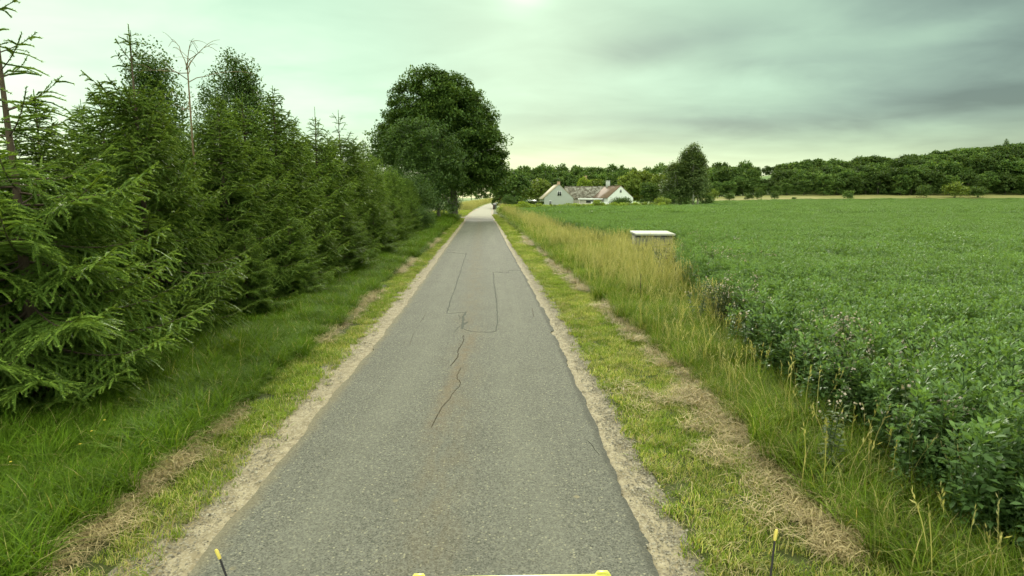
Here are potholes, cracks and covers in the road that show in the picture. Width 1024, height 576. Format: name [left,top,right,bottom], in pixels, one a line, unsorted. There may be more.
crack [431,335,464,428]
